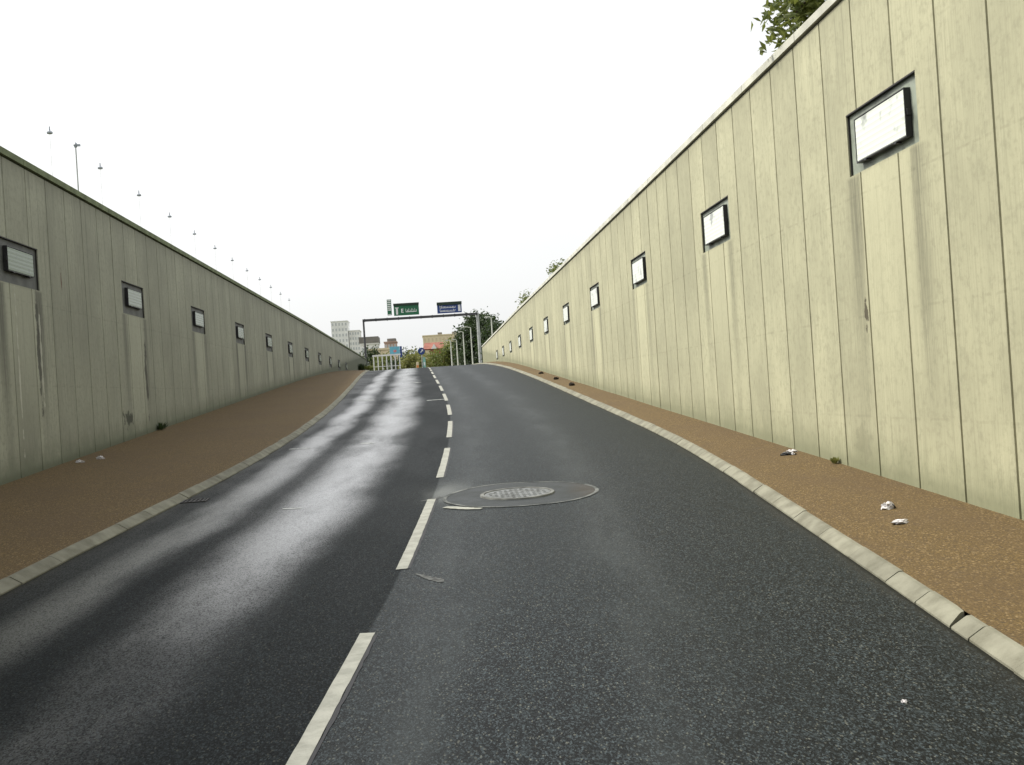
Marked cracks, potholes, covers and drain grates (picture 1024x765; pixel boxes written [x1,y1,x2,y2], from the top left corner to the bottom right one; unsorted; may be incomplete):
manhole cover [480,487,555,500]
